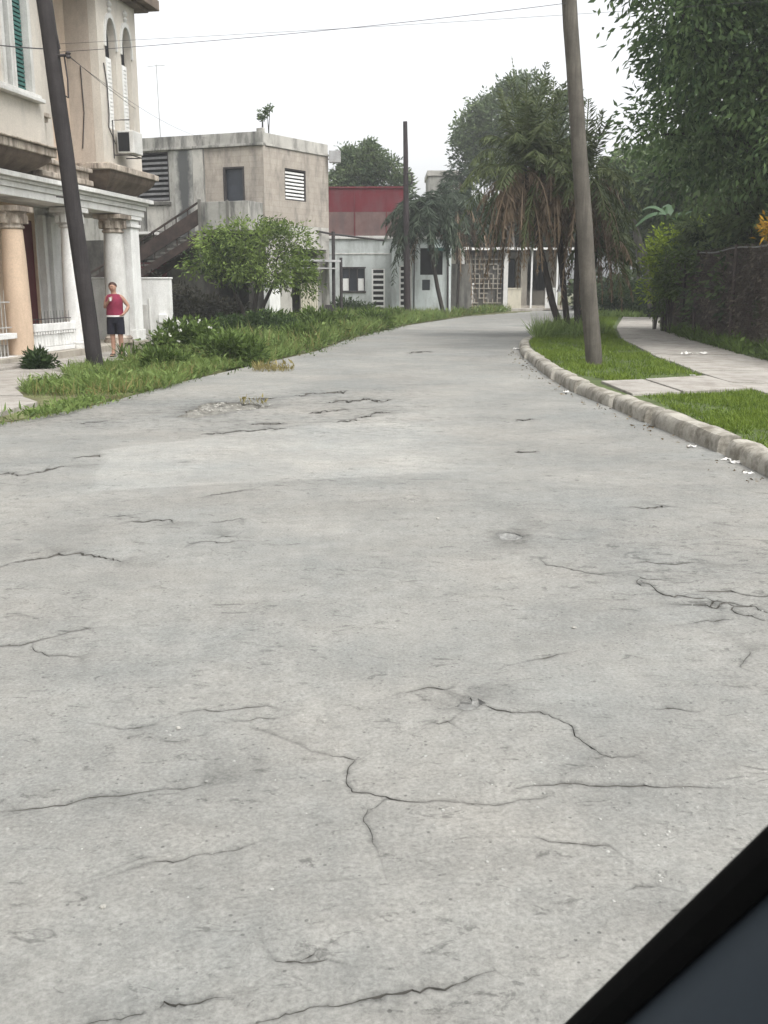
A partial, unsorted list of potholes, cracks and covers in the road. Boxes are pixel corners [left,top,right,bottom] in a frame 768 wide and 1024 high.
crack [2,552,121,567]
crack [311,751,704,845]
crack [89,997,220,1024]
pothole [178,402,268,418]
crack [0,628,88,657]
crack [485,705,633,758]
crack [636,561,768,622]
crack [295,390,391,422]
crack [256,971,491,1024]
pothole [497,532,524,540]
